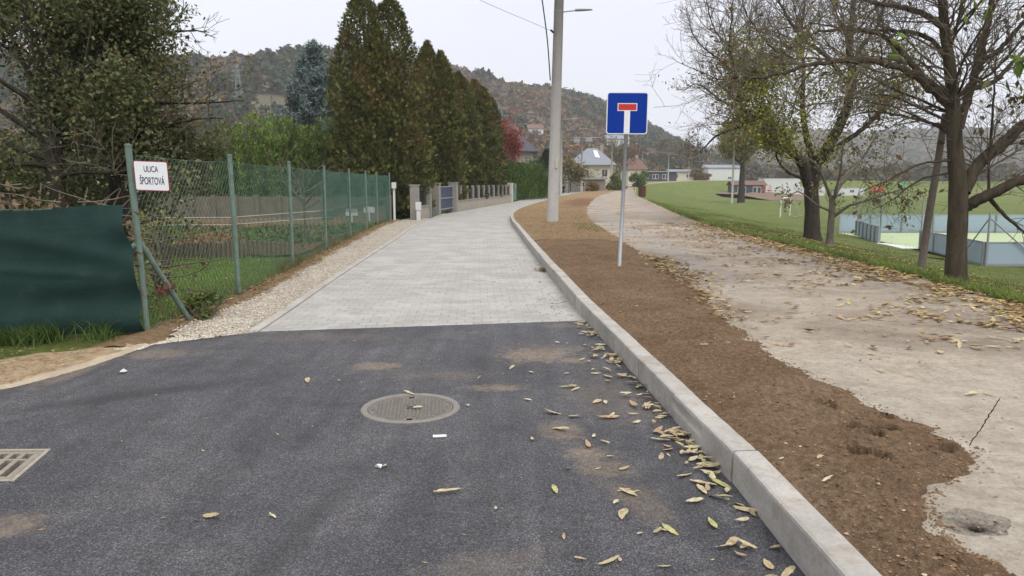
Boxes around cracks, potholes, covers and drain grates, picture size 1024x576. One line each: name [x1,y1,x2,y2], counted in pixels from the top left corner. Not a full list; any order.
drain grate [0,449,51,481]
pothole [931,507,1012,537]
manhole cover [360,393,460,424]
